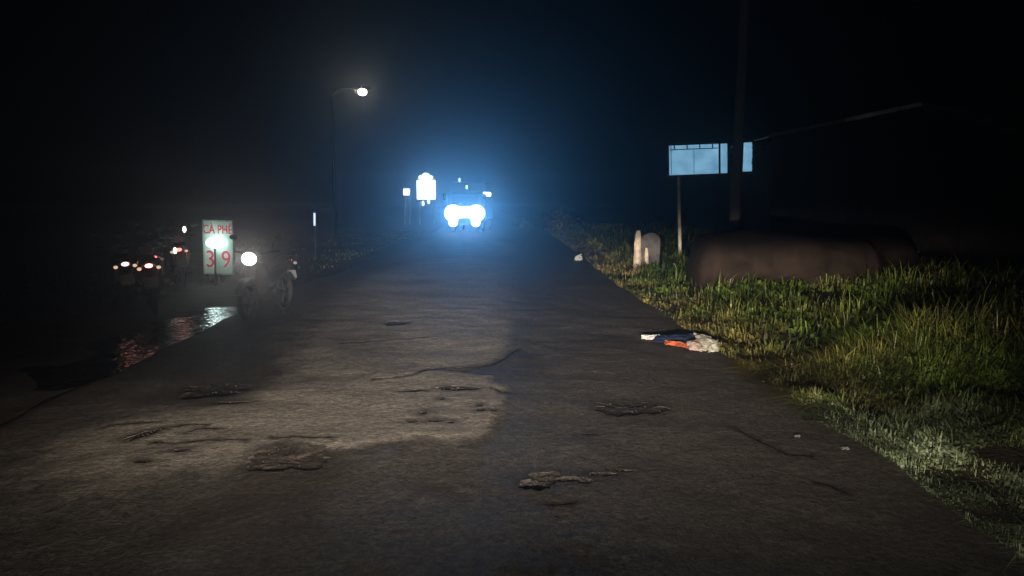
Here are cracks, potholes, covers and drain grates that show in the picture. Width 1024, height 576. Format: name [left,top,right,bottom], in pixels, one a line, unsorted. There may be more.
pothole [178,383,253,400]
pothole [245,440,331,472]
pothole [518,471,581,491]
crack [387,349,519,392]
pothole [124,428,164,441]
pothole [594,401,671,417]
crack [734,427,788,455]
crack [183,424,216,443]
